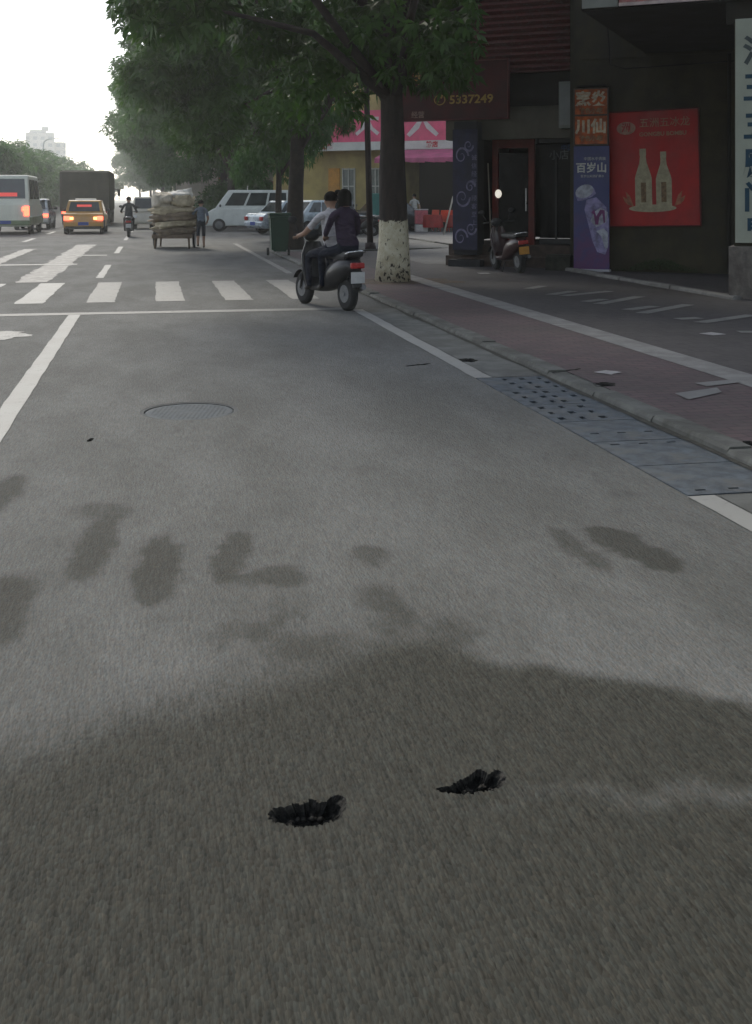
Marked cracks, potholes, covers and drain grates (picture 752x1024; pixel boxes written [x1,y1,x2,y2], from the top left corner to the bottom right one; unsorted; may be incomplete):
manhole cover [140,402,238,420]
drain grate [526,403,635,423]
pothole [436,769,507,795]
pothole [268,795,347,828]
drain grate [477,376,568,392]
drain grate [500,389,601,406]
